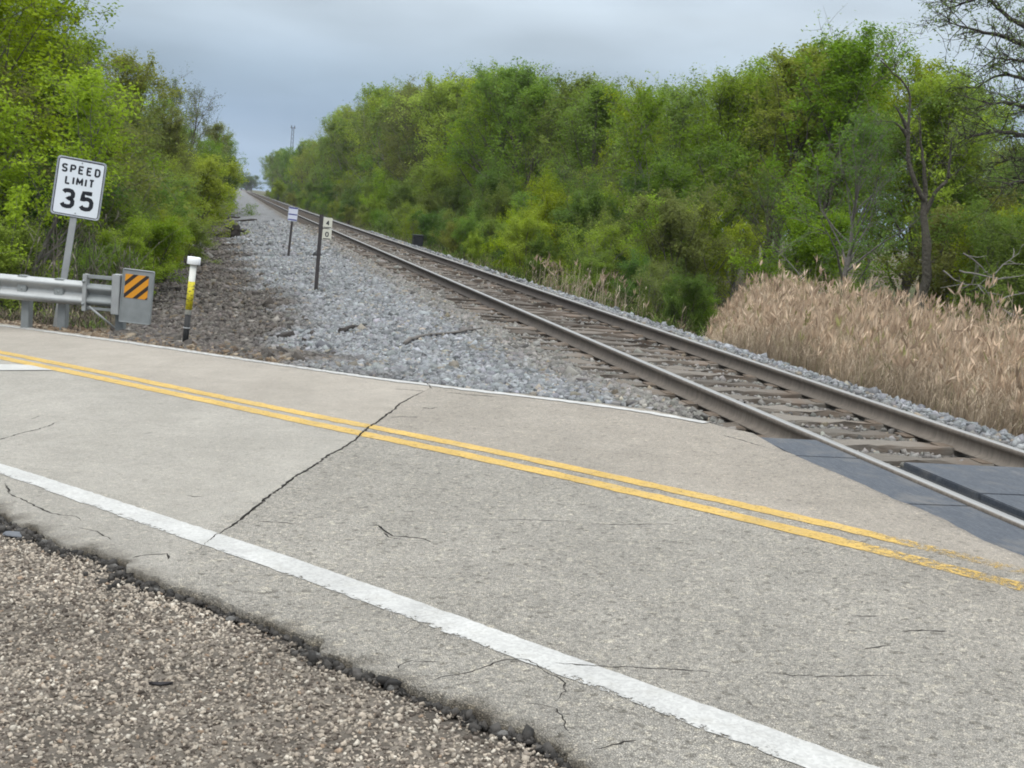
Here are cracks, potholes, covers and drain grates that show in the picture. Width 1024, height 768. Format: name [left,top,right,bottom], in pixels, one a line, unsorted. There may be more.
crack [595,740,636,749]
crack [397,659,569,732]
crack [599,665,889,677]
crack [4,483,114,540]
crack [186,383,438,549]
crack [863,630,945,650]
